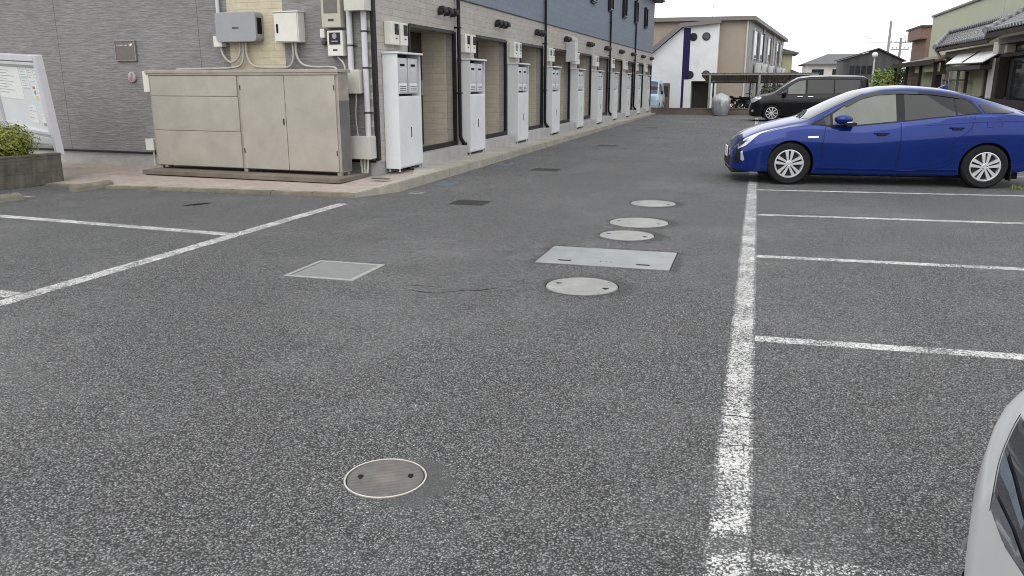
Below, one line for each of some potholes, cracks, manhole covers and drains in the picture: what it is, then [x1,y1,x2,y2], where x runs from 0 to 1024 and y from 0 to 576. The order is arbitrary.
manhole cover [535,246,677,271]
manhole cover [284,260,385,281]
manhole cover [608,218,670,228]
manhole cover [544,277,620,296]
manhole cover [344,459,427,499]
manhole cover [598,230,656,241]
crack [405,285,499,297]
